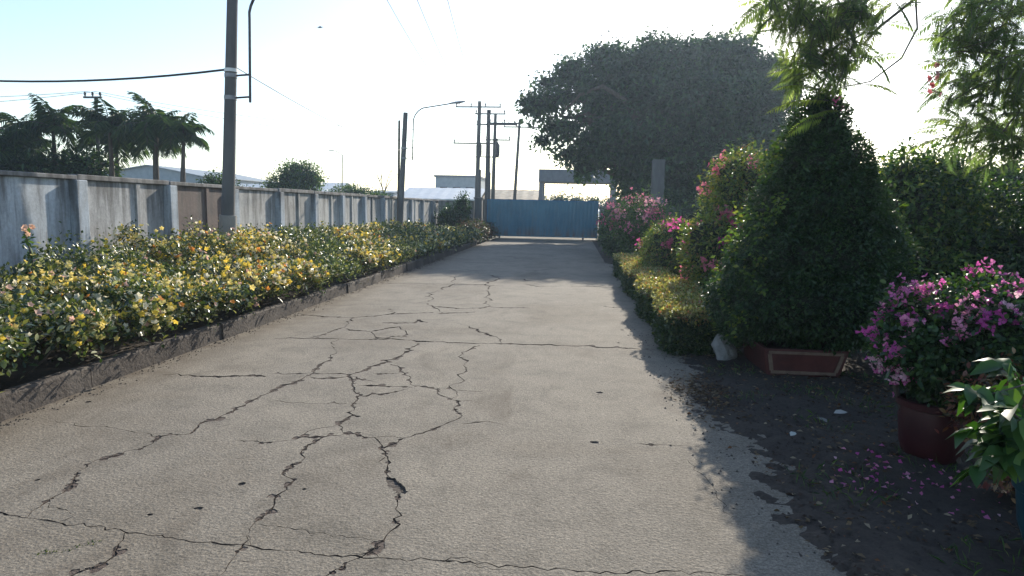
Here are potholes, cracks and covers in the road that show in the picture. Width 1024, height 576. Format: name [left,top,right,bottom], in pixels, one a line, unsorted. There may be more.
crack [27,275,524,576]
